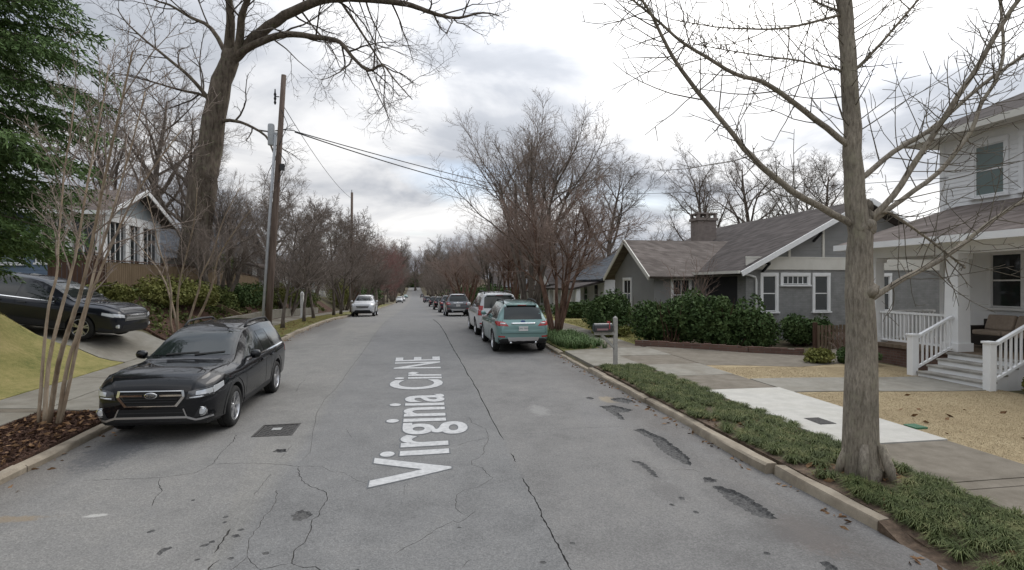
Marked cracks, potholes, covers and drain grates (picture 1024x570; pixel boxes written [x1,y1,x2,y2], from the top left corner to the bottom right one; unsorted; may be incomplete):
pothole [712,486,778,519]
pothole [599,405,631,420]
pothole [630,460,658,477]
crack [104,435,365,570]
pothole [634,429,692,466]
manhole cover [251,423,301,437]
